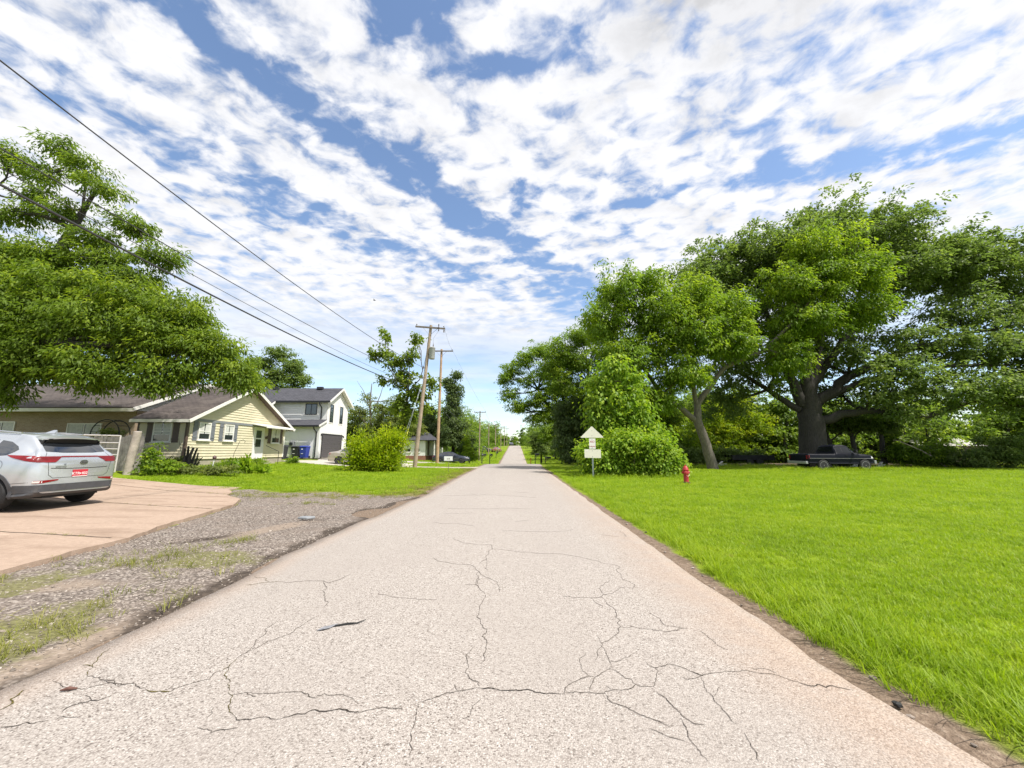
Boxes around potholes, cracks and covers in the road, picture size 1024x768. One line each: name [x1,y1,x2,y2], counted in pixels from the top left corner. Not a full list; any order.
crack [0,619,402,732]
crack [422,568,850,761]
crack [436,495,613,661]
